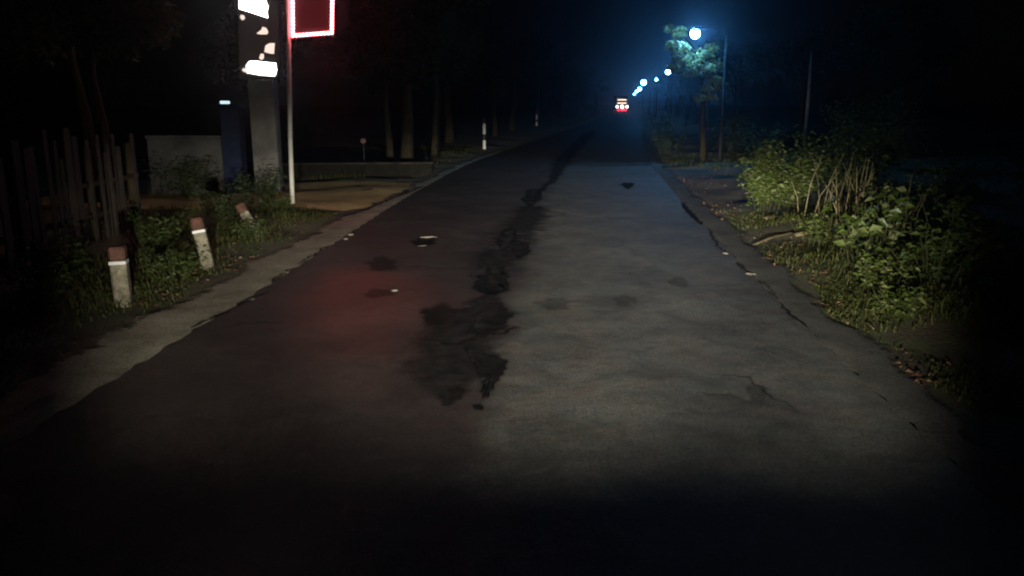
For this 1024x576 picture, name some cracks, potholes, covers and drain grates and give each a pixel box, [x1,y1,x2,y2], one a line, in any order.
pothole [410,237,435,246]
crack [709,229,807,327]
